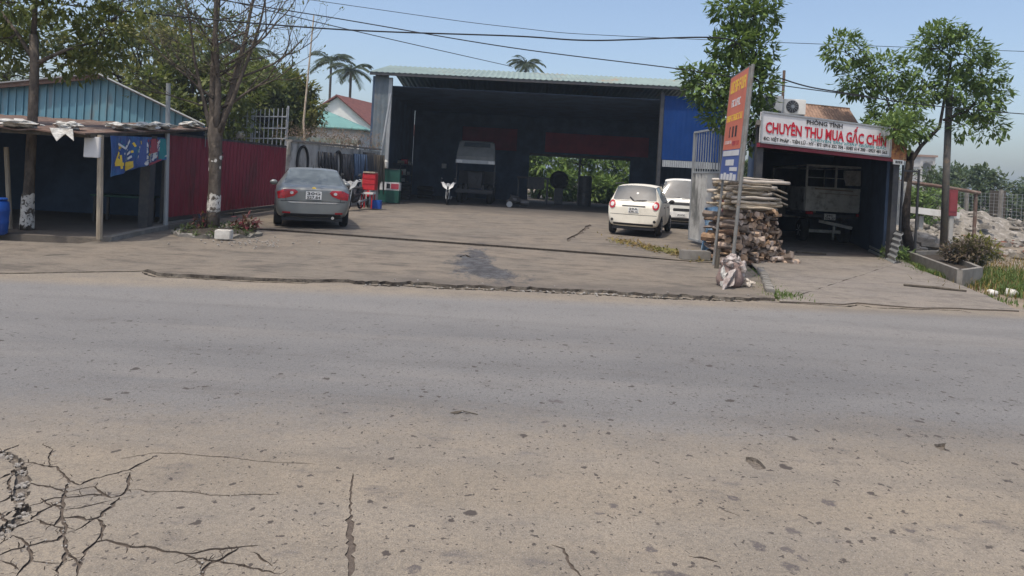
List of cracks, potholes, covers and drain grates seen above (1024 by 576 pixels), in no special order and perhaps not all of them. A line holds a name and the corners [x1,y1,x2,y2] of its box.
crack [567,225,591,242]
crack [0,443,307,576]
crack [552,545,581,576]
crack [345,475,356,576]
